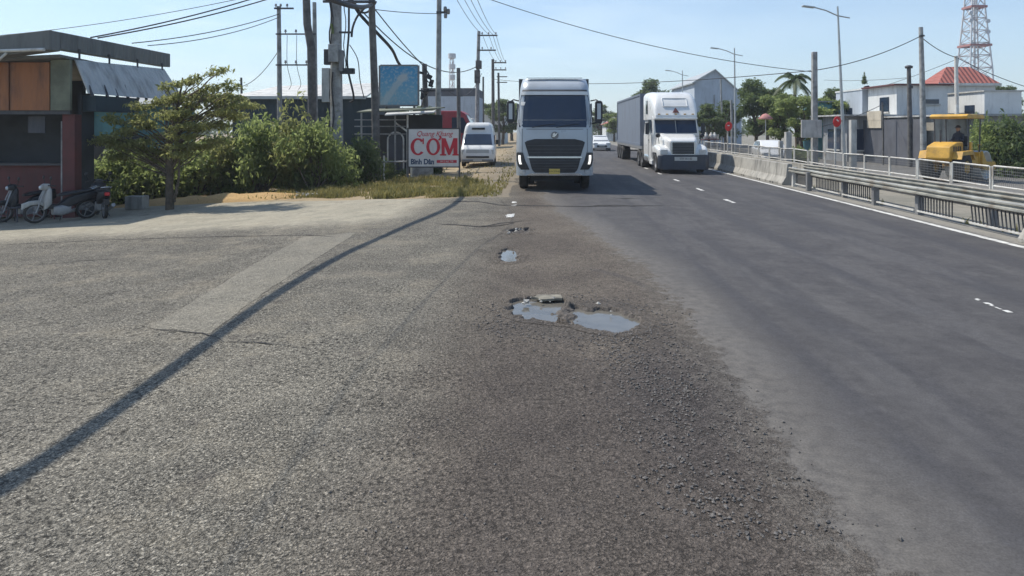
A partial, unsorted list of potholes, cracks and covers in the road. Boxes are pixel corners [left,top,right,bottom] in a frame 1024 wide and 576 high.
pothole [489,246,528,264]
pothole [500,226,542,235]
crack [149,328,294,346]
pothole [494,292,656,337]
